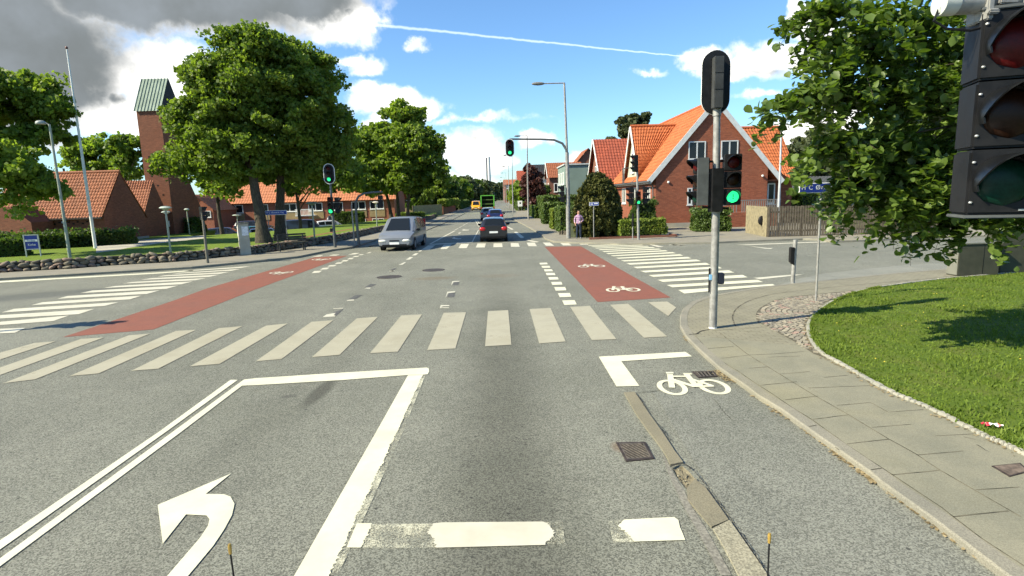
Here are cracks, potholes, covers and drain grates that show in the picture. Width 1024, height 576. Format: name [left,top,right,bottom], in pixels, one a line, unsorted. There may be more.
manhole cover [992,463,1024,477]
drain grate [616,442,654,462]
